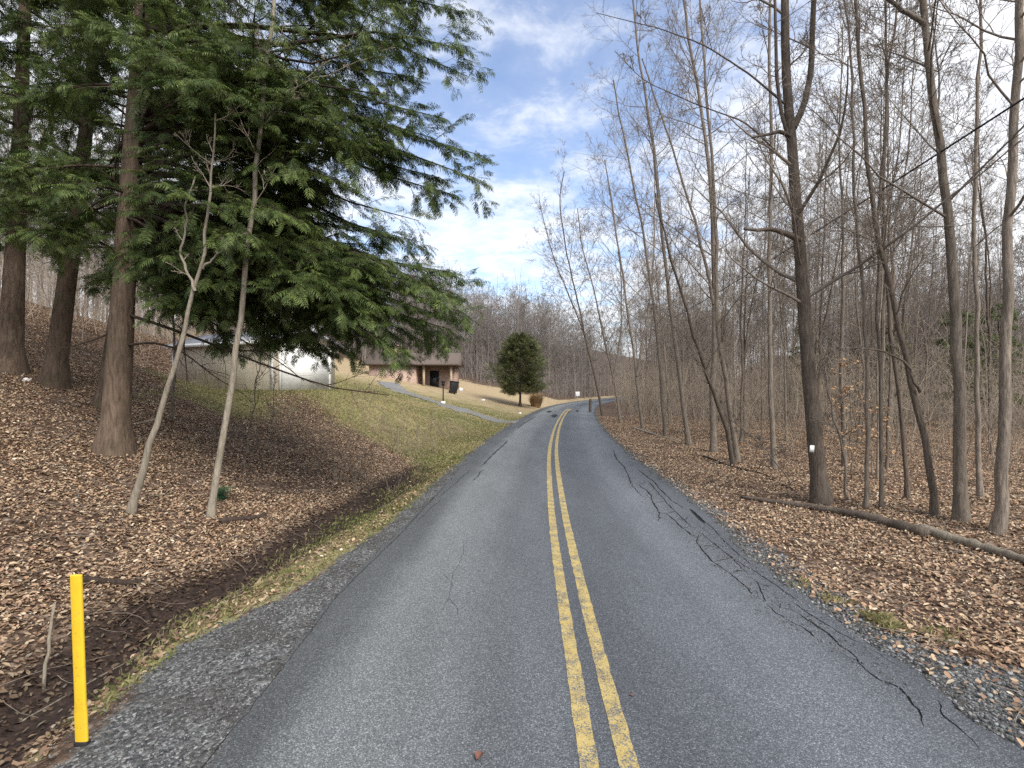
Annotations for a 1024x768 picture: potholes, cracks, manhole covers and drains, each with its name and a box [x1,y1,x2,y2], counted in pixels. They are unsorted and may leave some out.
crack [613,450,980,749]
crack [417,417,534,522]
